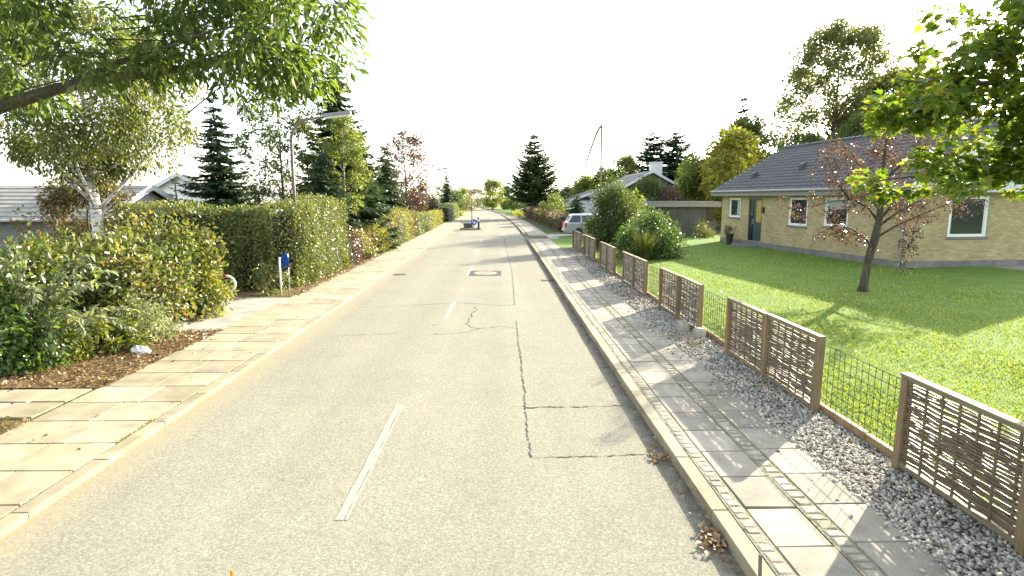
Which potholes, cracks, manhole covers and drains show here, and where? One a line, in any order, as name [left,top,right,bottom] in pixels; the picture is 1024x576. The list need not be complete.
crack [434,307,642,458]
